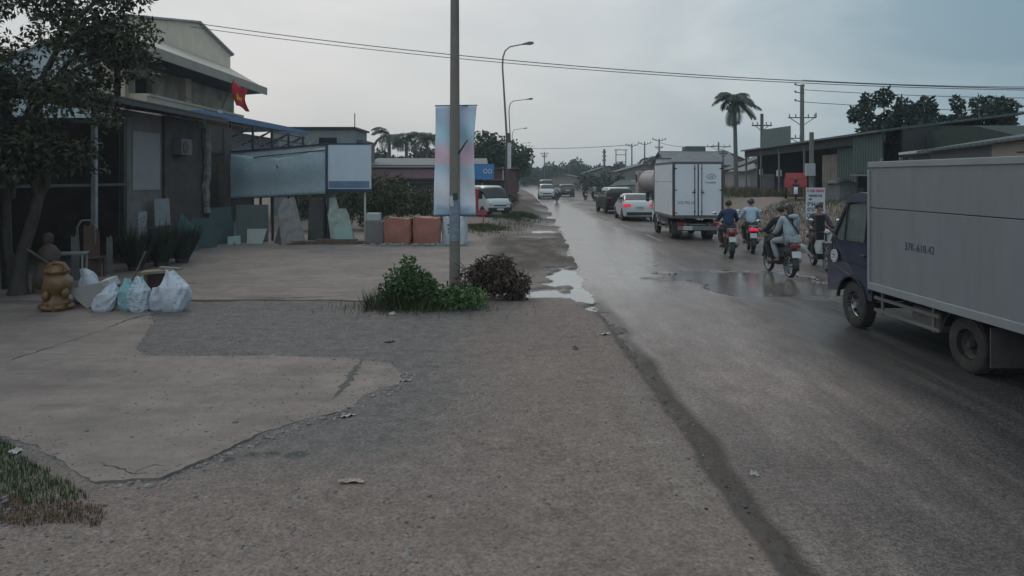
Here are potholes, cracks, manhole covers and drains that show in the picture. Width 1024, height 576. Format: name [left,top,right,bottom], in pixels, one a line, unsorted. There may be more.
crack [12,314,152,360]
crack [333,359,363,398]
